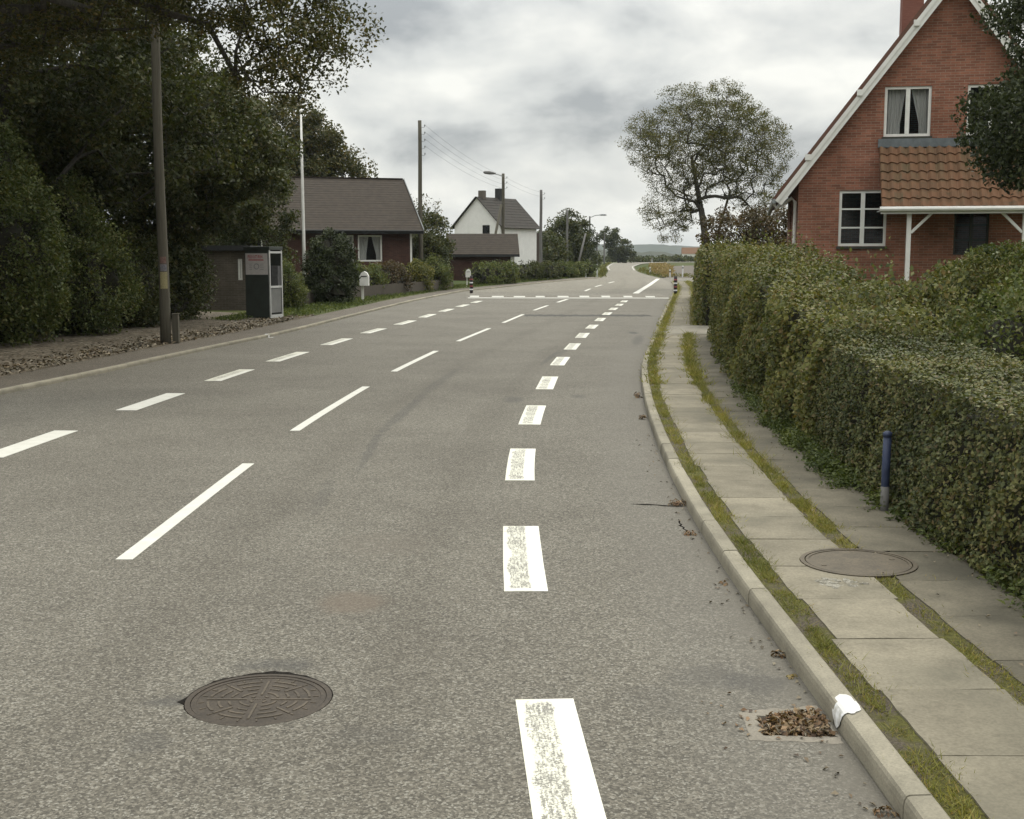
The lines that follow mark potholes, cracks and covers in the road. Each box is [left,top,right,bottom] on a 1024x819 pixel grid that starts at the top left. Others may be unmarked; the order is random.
manhole cover [800,548,918,578]
drain grate [739,705,844,744]
manhole cover [177,671,333,726]
